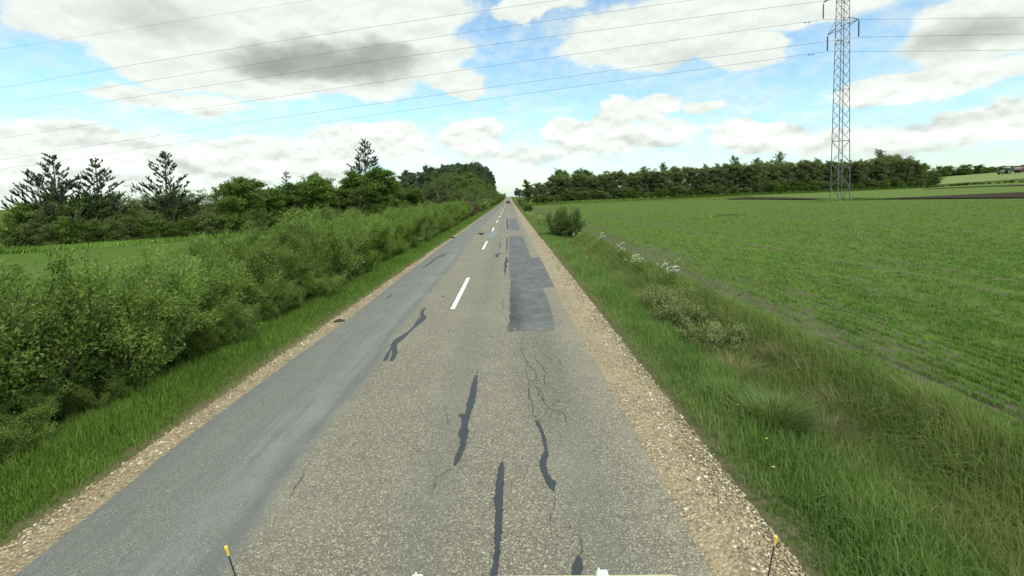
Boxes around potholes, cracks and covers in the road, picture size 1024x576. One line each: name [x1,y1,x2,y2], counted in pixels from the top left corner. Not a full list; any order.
crack [521,341,567,424]
